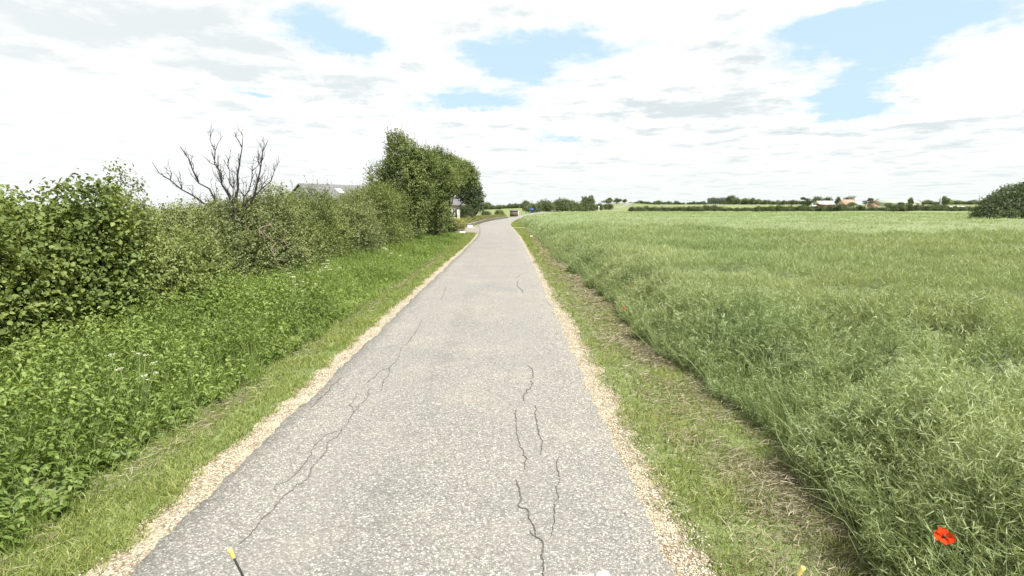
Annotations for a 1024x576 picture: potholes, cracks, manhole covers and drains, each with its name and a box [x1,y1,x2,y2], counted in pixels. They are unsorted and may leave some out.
crack [240,321,422,543]
crack [515,367,560,576]
